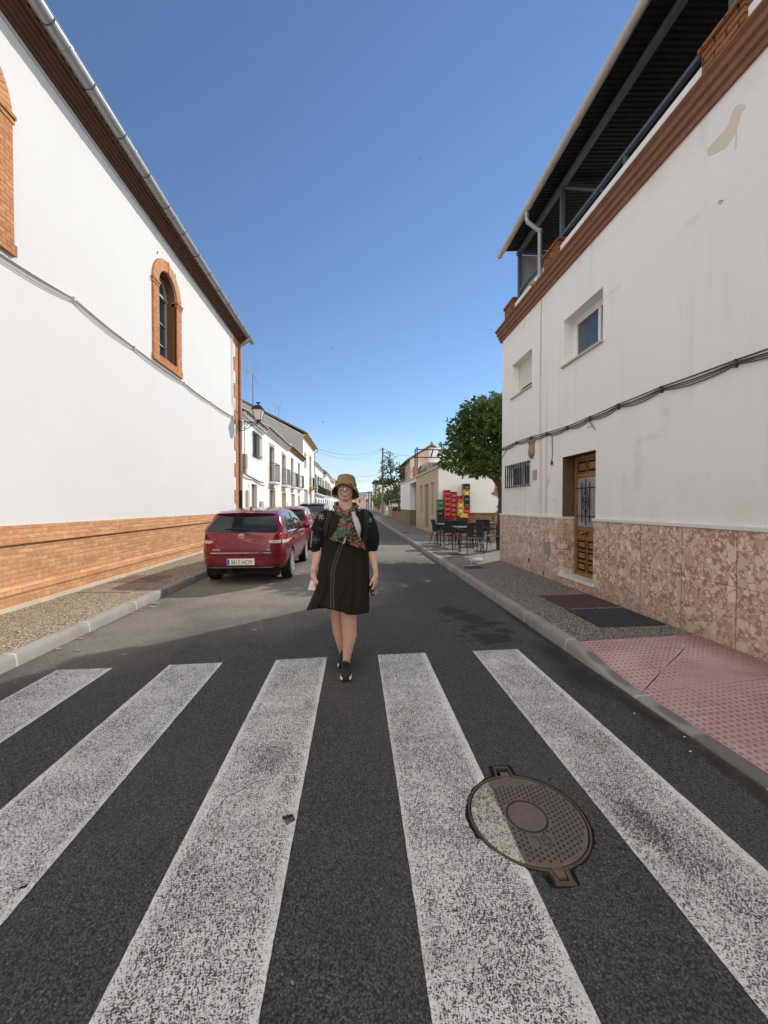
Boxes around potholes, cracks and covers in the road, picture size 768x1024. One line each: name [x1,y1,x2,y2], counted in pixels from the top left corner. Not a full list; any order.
manhole cover [465,765,595,888]
